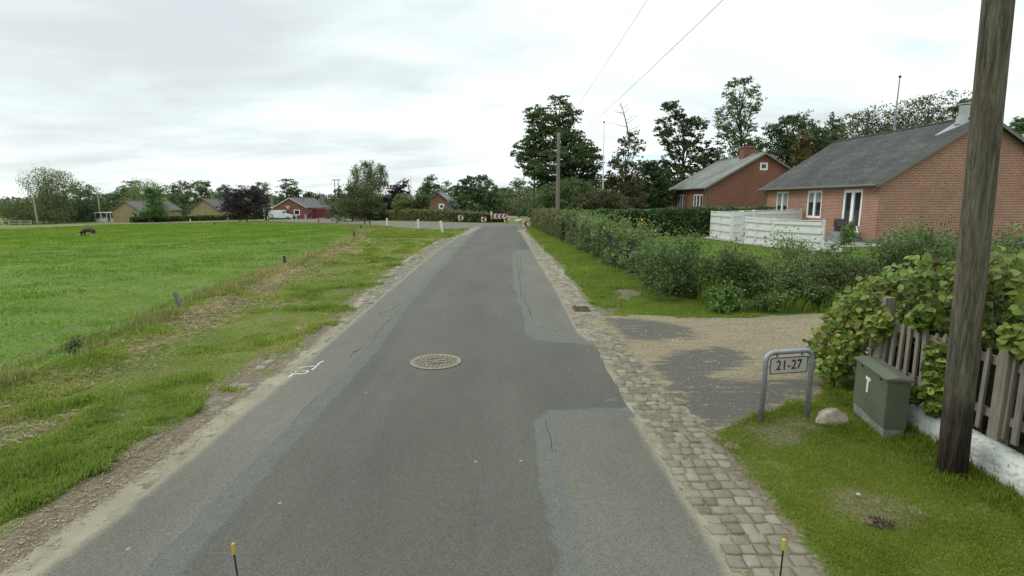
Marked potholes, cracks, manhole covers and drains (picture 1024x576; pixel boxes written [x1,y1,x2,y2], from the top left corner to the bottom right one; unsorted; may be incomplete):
manhole cover [410,354,461,370]
